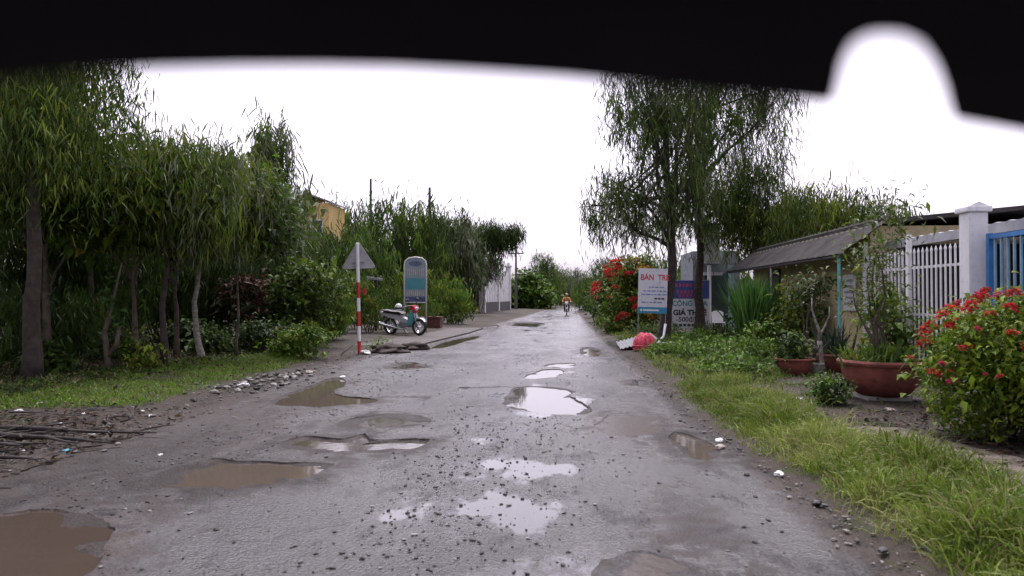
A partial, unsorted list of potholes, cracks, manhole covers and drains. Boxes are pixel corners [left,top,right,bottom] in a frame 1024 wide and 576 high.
pothole [269,378,378,407]
pothole [0,509,116,576]
pothole [502,386,592,415]
pothole [524,369,564,379]
pothole [335,413,431,430]
pothole [591,550,689,576]
pothole [579,347,602,357]
pothole [149,458,334,489]
pothole [668,432,722,460]
pothole [280,434,431,453]
pothole [594,412,665,436]
